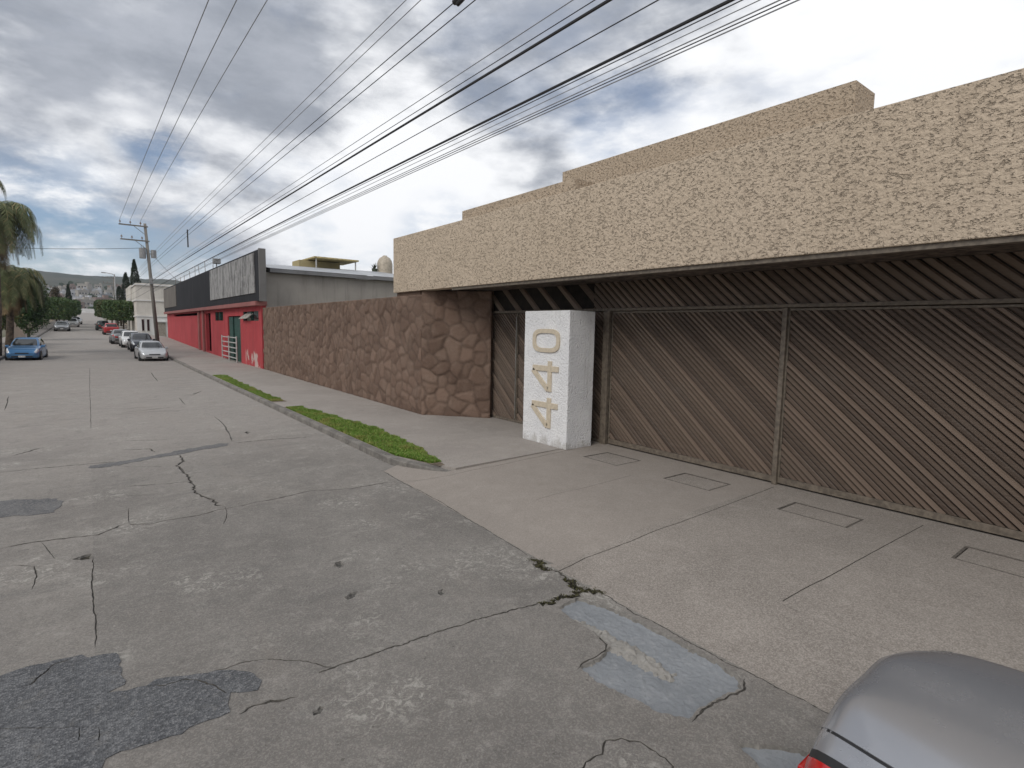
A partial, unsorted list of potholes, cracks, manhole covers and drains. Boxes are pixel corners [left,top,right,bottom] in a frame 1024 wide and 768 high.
manhole cover [951,546,1024,578]
crack [152,658,334,714]
manhole cover [664,473,731,491]
crack [581,737,675,768]
manhole cover [777,502,864,528]
manhole cover [583,452,641,466]
crack [122,416,396,525]
